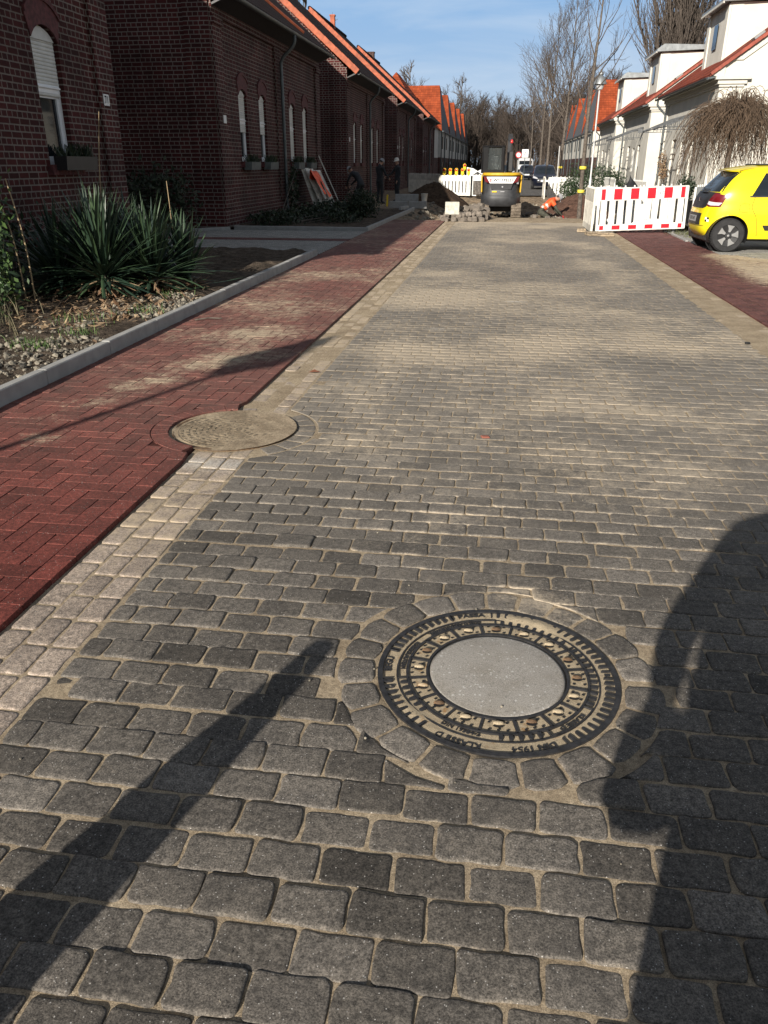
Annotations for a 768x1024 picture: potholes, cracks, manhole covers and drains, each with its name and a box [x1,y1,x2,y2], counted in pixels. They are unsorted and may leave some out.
manhole cover [378,610,621,758]
manhole cover [168,410,297,452]
